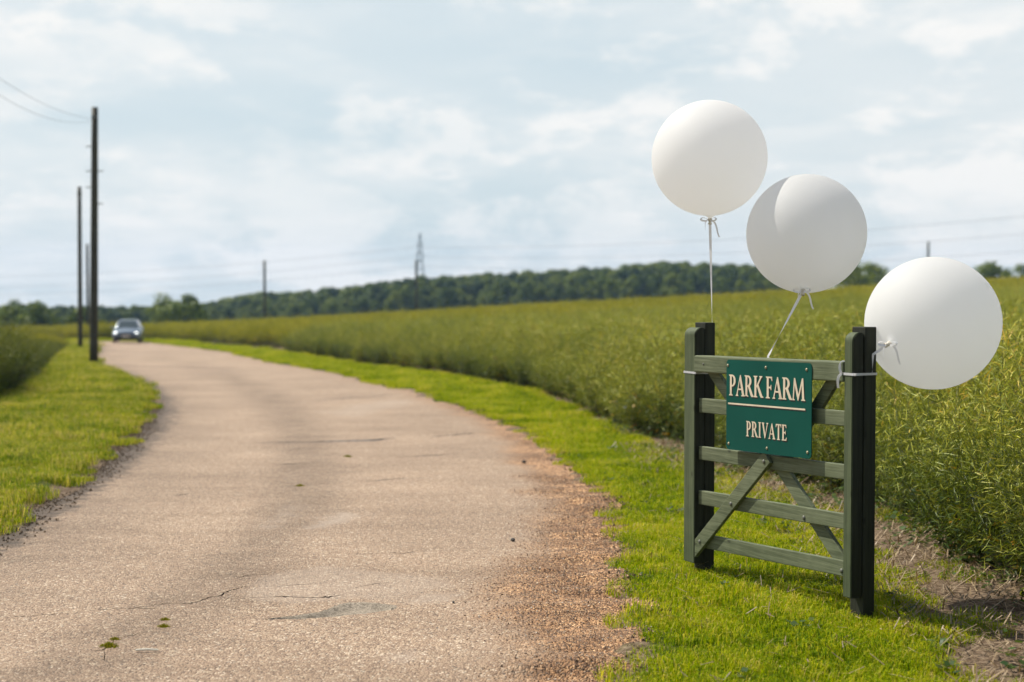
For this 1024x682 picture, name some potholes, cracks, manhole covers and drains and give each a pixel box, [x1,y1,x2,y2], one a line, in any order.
crack [272,438,446,458]
crack [16,572,333,617]
